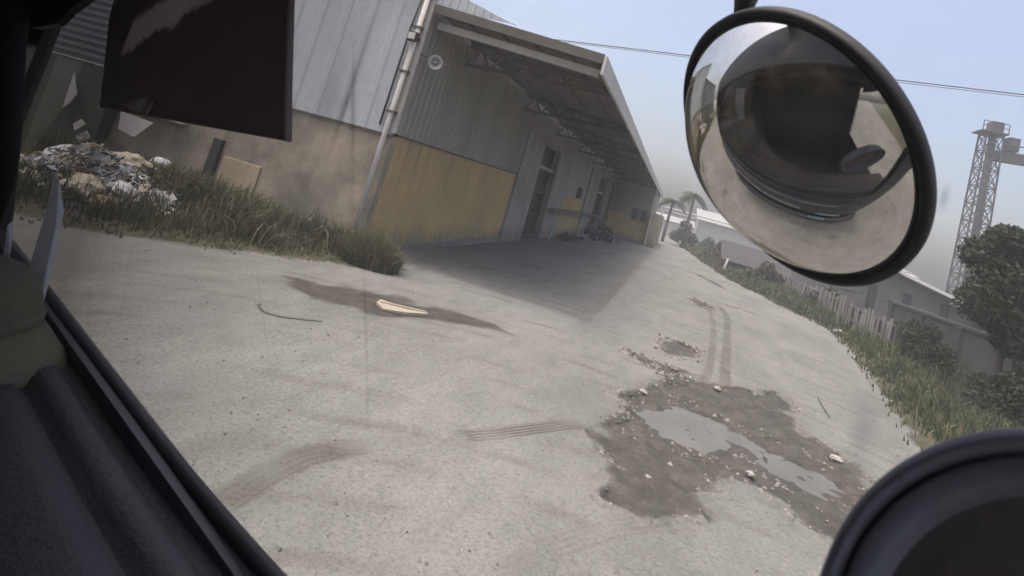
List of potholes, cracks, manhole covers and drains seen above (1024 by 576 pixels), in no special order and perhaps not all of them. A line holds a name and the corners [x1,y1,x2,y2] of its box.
pothole [574,373,876,551]
pothole [682,296,718,311]
pothole [656,335,704,362]
pothole [619,349,693,386]
